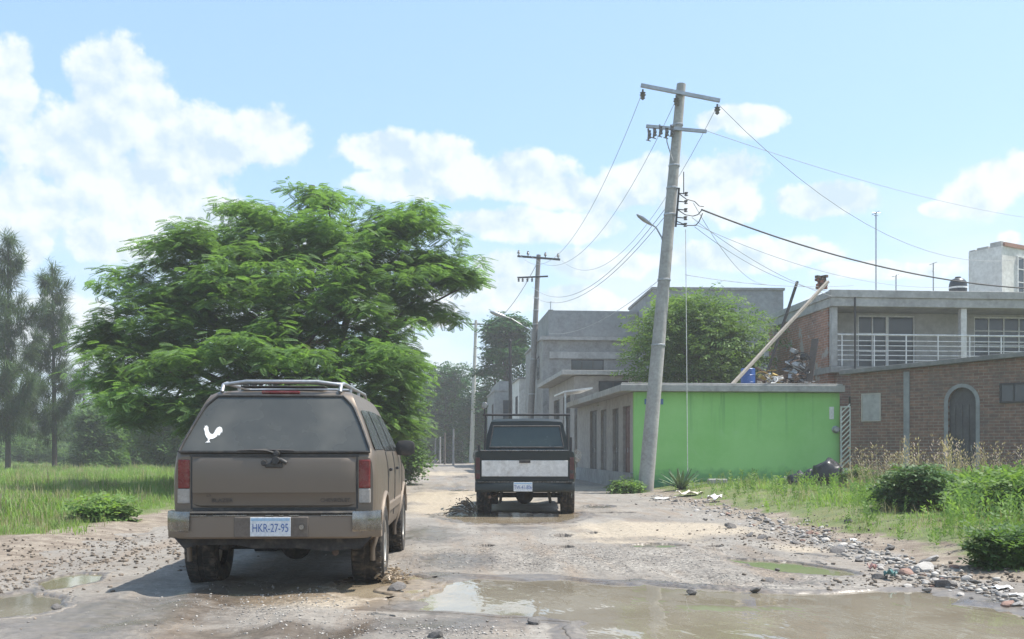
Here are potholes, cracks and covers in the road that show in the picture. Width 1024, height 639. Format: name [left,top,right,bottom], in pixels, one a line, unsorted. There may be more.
pothole [709,556,872,578]
pothole [428,510,593,525]
pothole [0,587,77,620]
pothole [26,570,115,596]
pothole [373,574,1024,639]
